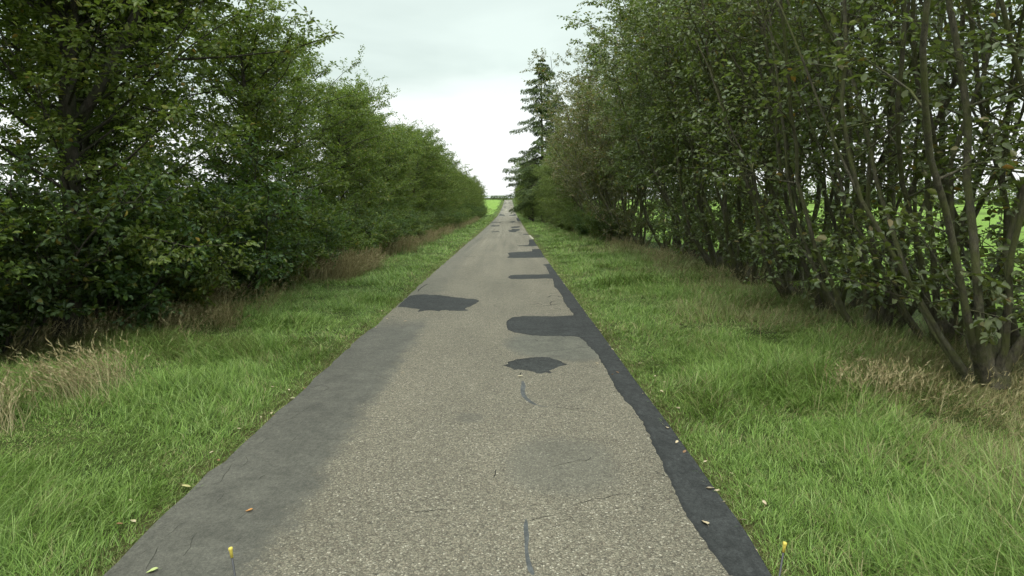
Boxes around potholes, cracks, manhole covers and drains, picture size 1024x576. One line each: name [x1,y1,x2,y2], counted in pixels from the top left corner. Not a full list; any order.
crack [530,493,622,521]
